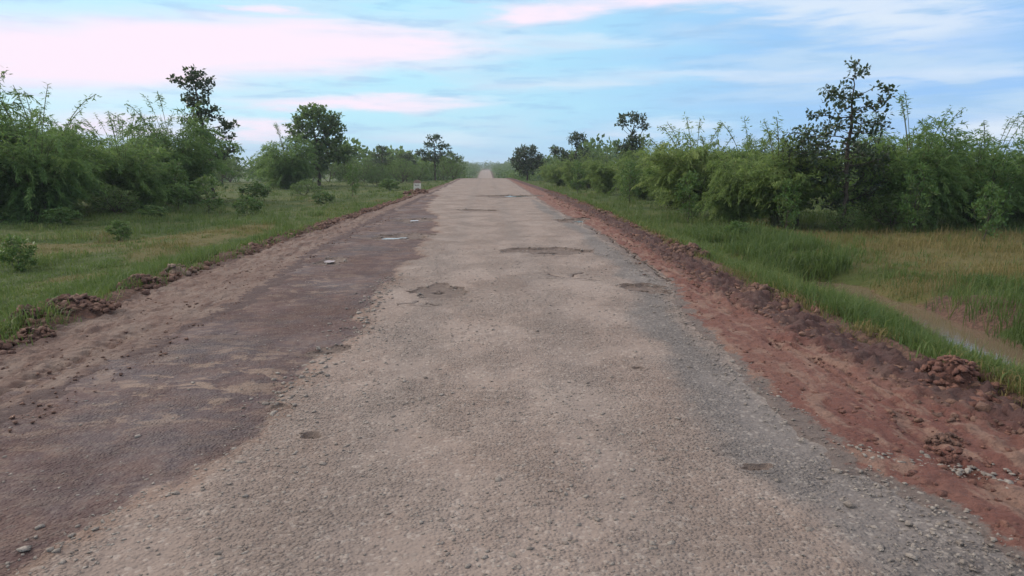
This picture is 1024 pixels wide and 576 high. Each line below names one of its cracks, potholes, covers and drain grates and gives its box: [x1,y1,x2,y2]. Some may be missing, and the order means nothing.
pothole [734,461,779,473]
pothole [401,281,473,300]
pothole [295,429,327,441]
pothole [495,246,598,257]
pothole [615,281,675,296]
